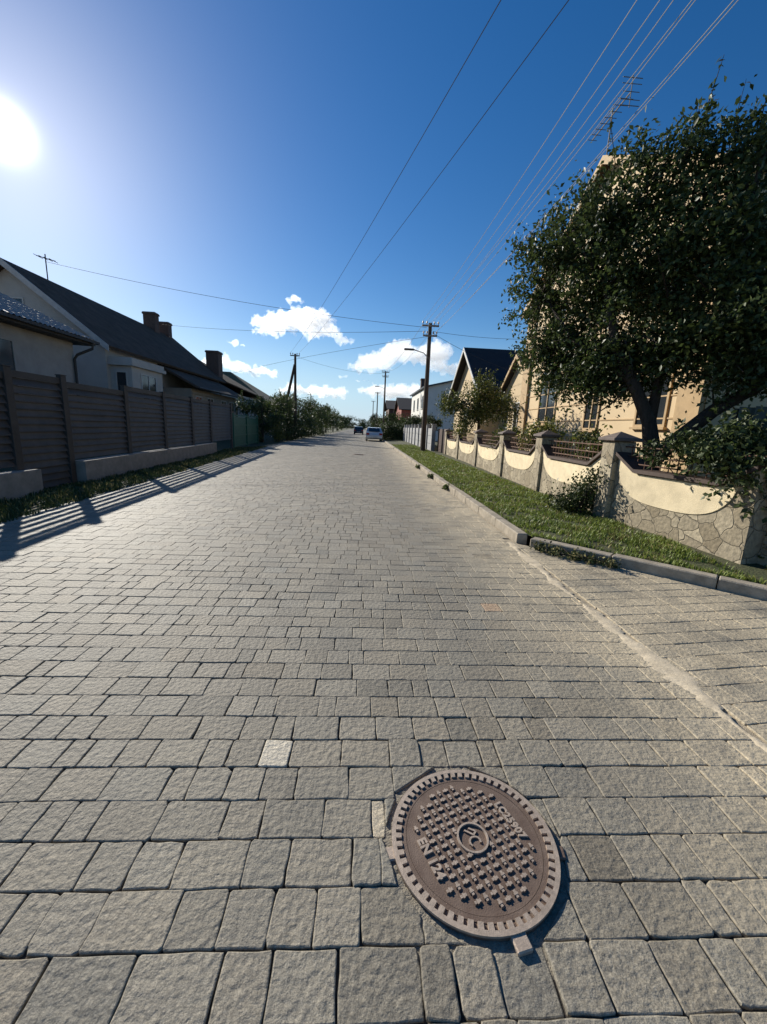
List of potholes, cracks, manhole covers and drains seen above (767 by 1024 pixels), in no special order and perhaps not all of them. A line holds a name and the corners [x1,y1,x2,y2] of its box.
manhole cover [386,770,566,957]
